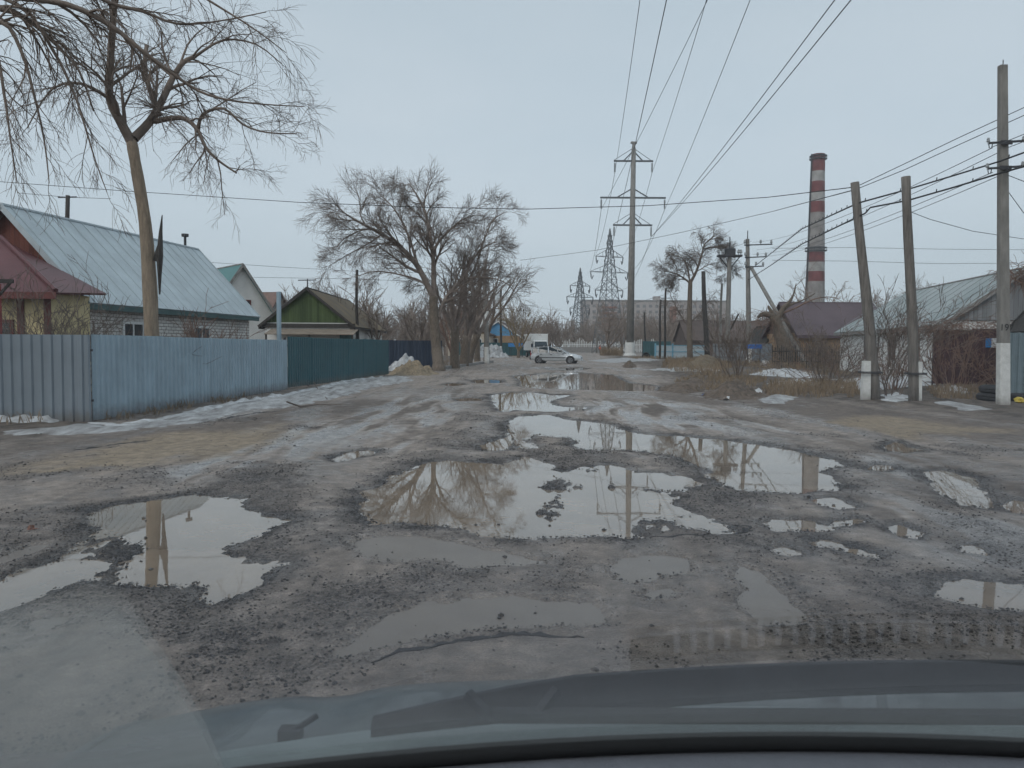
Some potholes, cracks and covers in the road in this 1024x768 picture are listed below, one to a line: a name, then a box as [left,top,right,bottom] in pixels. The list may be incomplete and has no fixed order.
pothole [907,467,1006,512]
pothole [593,547,705,587]
pothole [345,455,748,542]
pothole [501,413,857,494]
pothole [512,372,660,391]
pothole [487,391,591,412]
pothole [717,559,828,634]
pothole [0,488,309,616]
crack [371,628,584,663]
pothole [822,514,880,528]
pothole [909,570,1024,616]
